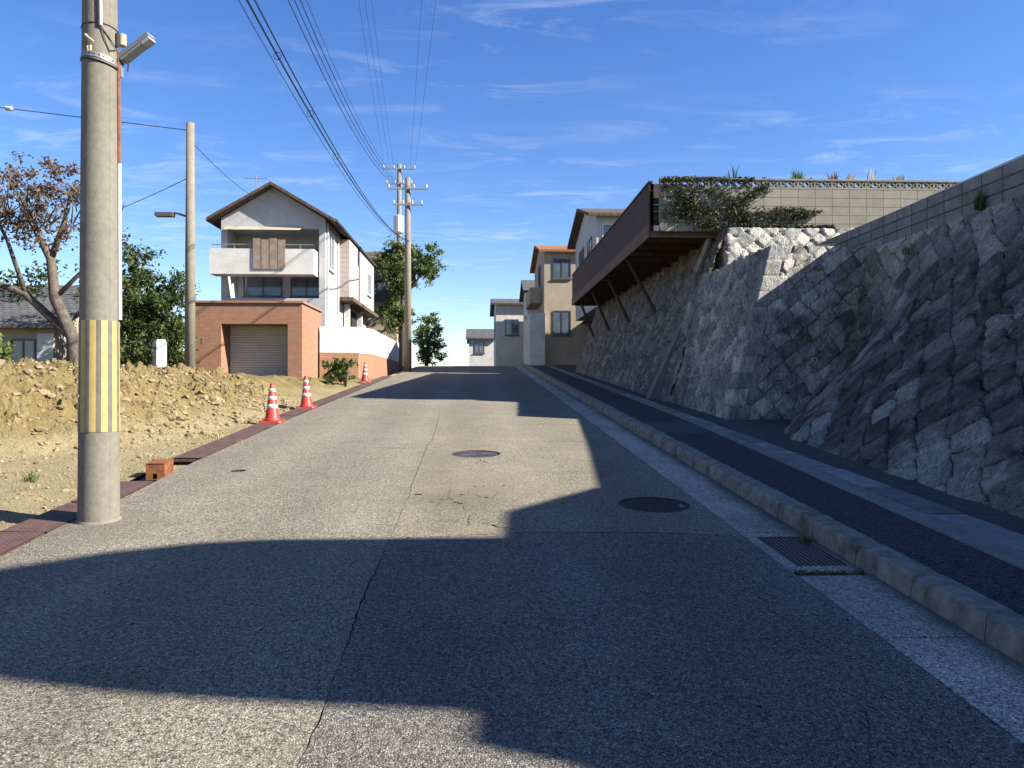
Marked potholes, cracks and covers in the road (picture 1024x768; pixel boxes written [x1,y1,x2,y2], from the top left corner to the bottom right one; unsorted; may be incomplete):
crack [296,421,438,768]
manhole cover [452,450,501,458]
drain grate [756,537,847,566]
manhole cover [618,498,690,513]
crack [407,489,706,539]
